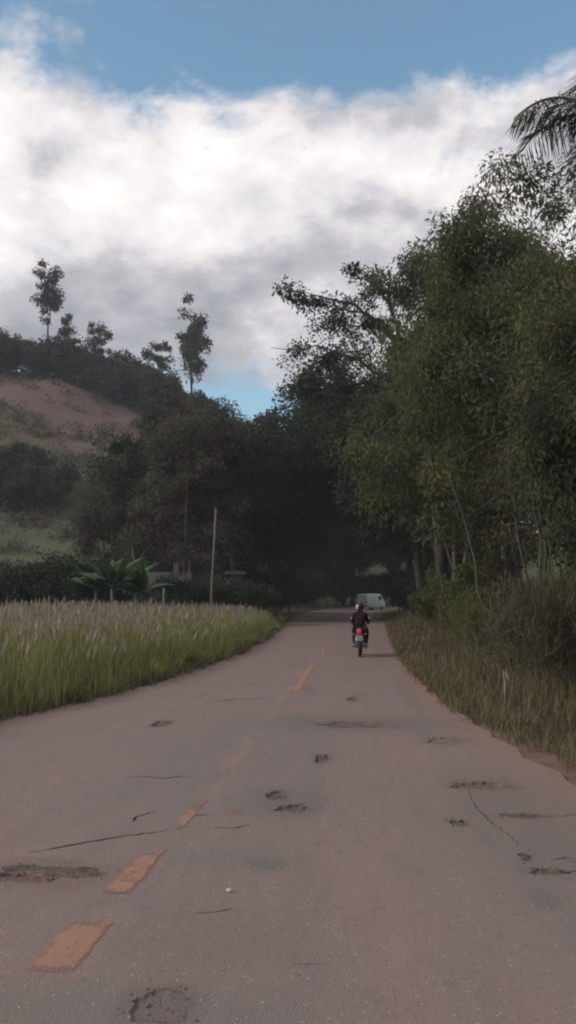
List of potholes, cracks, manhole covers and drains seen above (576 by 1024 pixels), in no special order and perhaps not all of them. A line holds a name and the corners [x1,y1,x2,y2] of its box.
pothole [426,736,473,745]
pothole [118,979,199,1024]
crack [28,811,167,853]
pothole [443,818,471,826]
crack [468,790,529,850]
pothole [258,789,288,801]
pothole [0,862,134,883]
pothole [450,781,522,792]
pothole [270,804,314,814]
pothole [314,719,408,729]
pothole [314,752,337,767]
pothole [529,866,572,875]
